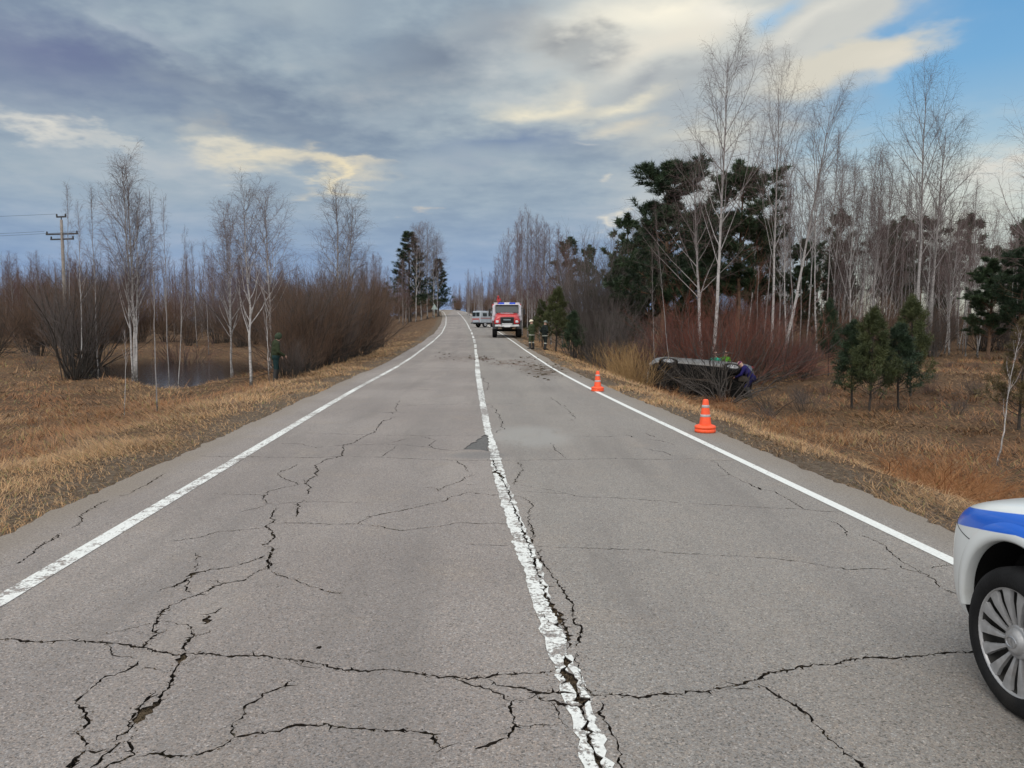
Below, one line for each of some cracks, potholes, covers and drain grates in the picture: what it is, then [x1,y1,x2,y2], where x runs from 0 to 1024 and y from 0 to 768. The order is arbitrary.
crack [0,378,973,768]
